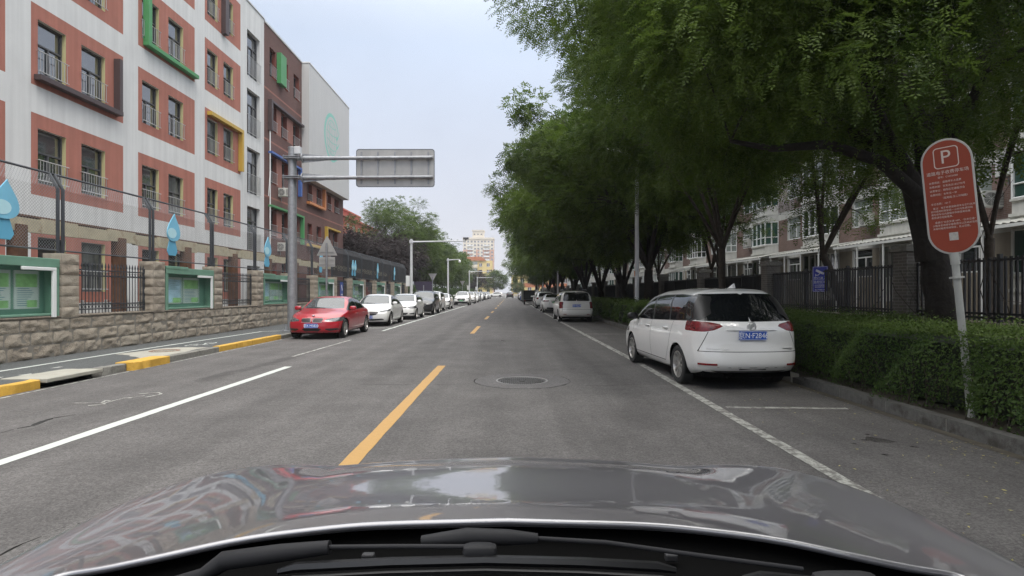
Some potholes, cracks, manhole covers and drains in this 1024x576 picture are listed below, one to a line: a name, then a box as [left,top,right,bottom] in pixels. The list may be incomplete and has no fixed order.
crack [1,415,71,433]
manhole cover [474,374,570,389]
